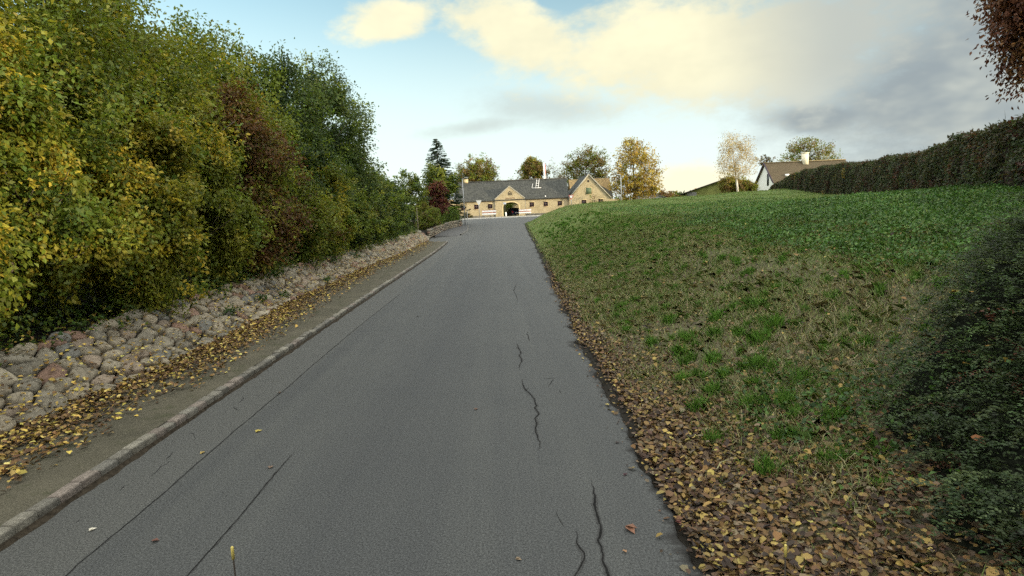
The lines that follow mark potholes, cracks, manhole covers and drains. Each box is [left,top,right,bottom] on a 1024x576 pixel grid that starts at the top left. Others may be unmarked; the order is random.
crack [65,296,397,576]
crack [556,483,612,576]
crack [516,334,560,450]
